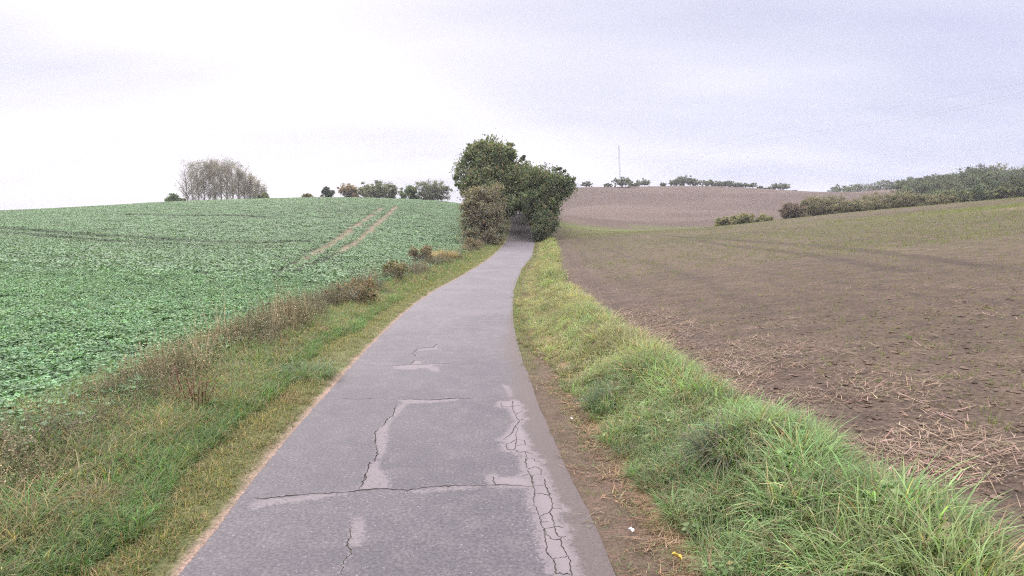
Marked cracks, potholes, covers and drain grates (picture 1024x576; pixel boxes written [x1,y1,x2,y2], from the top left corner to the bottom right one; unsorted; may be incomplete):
crack [256,398,573,576]
